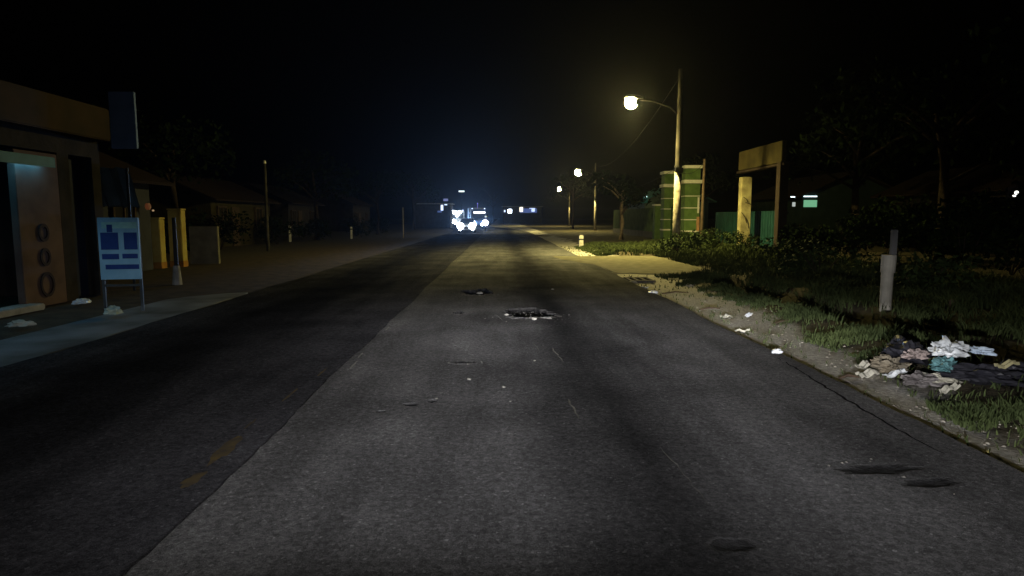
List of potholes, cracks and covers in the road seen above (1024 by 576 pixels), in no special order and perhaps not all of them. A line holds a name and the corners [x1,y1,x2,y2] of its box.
pothole [704,537,762,552]
pothole [900,477,964,488]
crack [779,358,945,454]
pothole [834,463,927,475]
pothole [457,287,496,296]
pothole [498,306,565,320]
